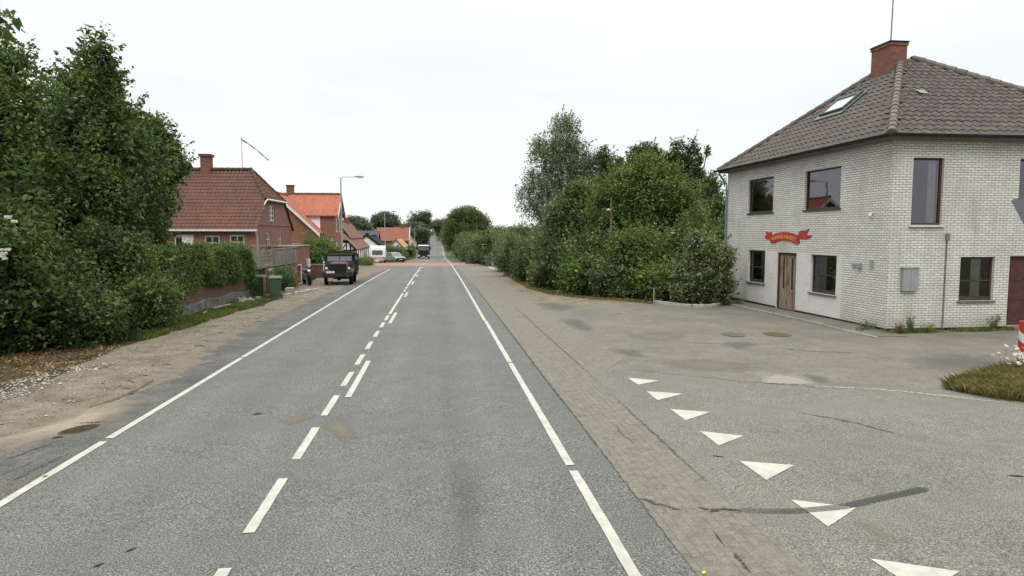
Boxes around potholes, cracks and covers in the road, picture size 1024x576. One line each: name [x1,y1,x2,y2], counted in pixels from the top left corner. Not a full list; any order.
manhole cover [57,424,100,435]
crack [804,413,892,433]
